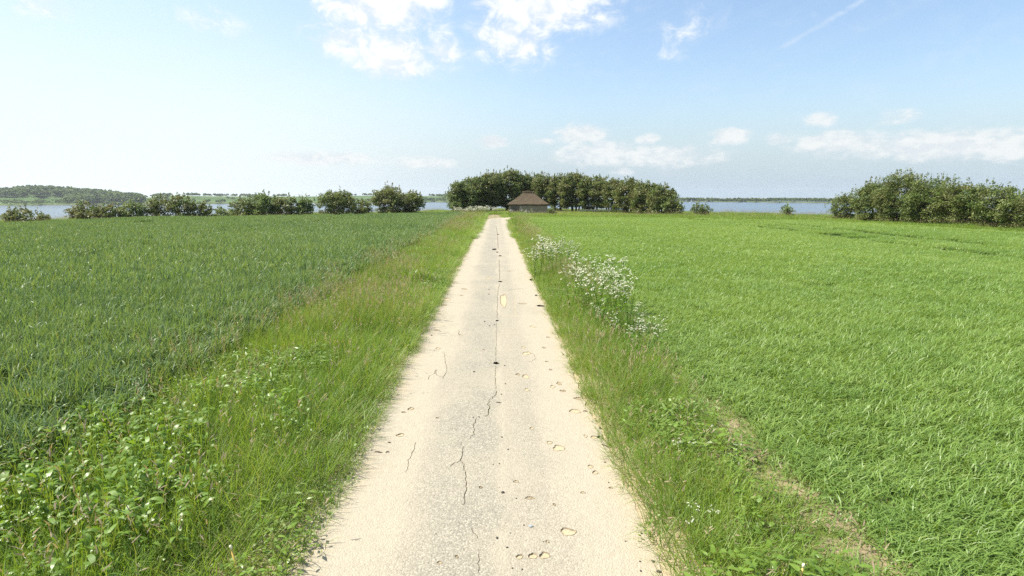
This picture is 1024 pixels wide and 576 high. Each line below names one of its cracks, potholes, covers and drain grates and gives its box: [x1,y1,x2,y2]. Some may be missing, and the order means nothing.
pothole [560,527,577,536]
crack [451,391,497,505]
